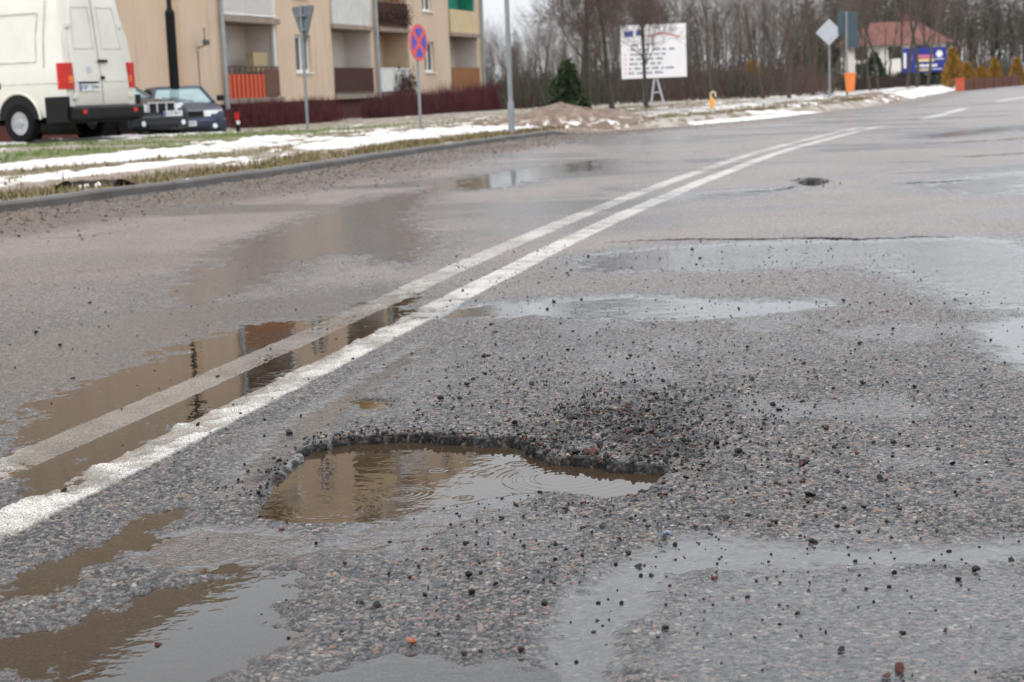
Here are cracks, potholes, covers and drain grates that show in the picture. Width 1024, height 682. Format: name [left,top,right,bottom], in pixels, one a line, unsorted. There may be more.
pothole [340,396,399,412]
pothole [794,177,830,186]
pothole [234,432,680,527]
